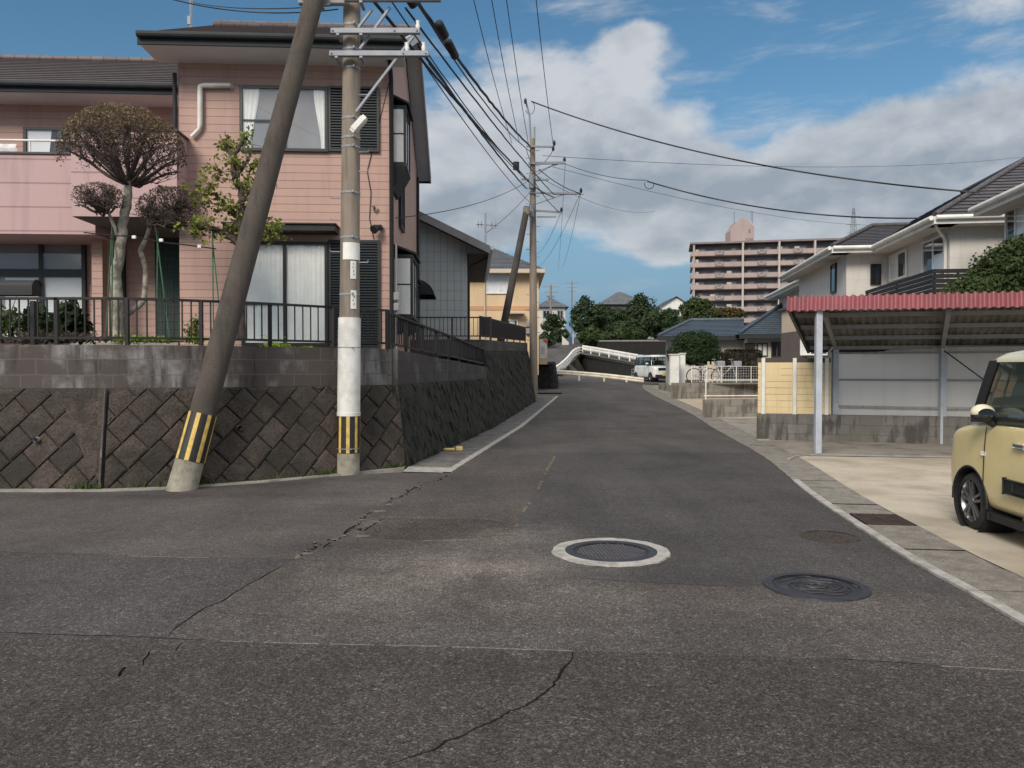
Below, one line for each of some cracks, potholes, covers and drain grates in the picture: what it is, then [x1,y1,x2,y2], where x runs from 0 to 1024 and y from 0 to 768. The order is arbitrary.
drain grate [850,513,915,526]
manhole cover [763,572,872,602]
manhole cover [799,530,861,543]
crack [382,656,574,765]
crack [168,475,448,655]
manhole cover [551,538,671,567]
crack [118,650,151,677]
